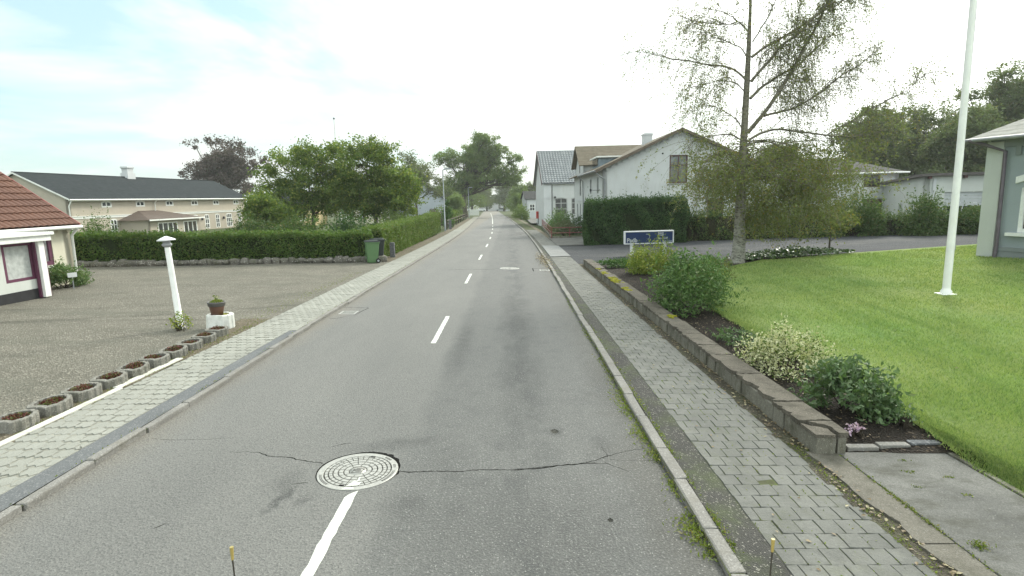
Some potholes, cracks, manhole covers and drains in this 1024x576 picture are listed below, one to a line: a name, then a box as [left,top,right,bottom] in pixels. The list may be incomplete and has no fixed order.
manhole cover [317,453,398,491]
crack [245,443,349,464]
crack [400,450,653,473]
